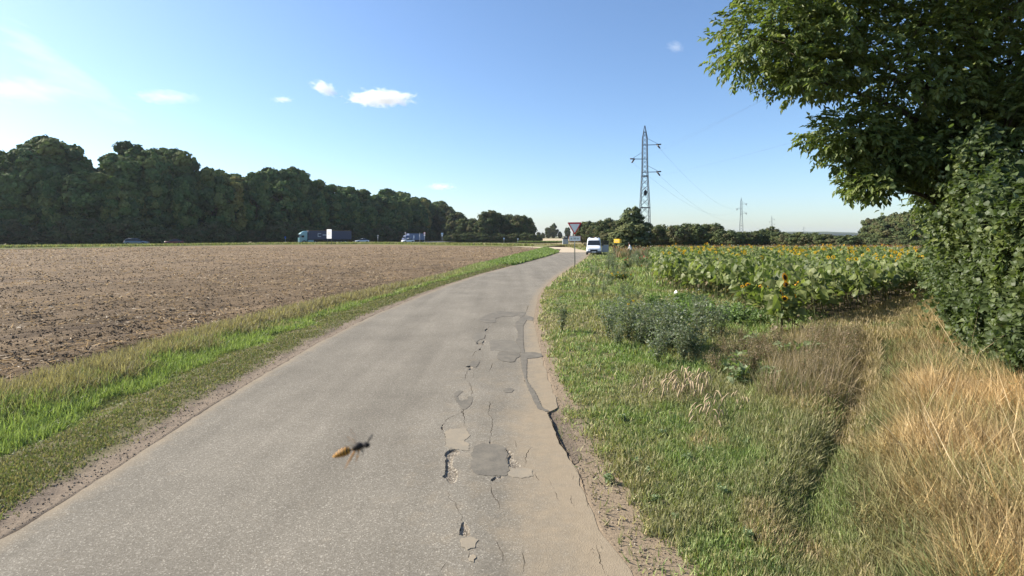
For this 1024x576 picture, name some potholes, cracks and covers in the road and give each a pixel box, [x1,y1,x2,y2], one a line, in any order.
pothole [459,521,471,537]
crack [442,374,493,452]
pothole [442,449,460,484]
